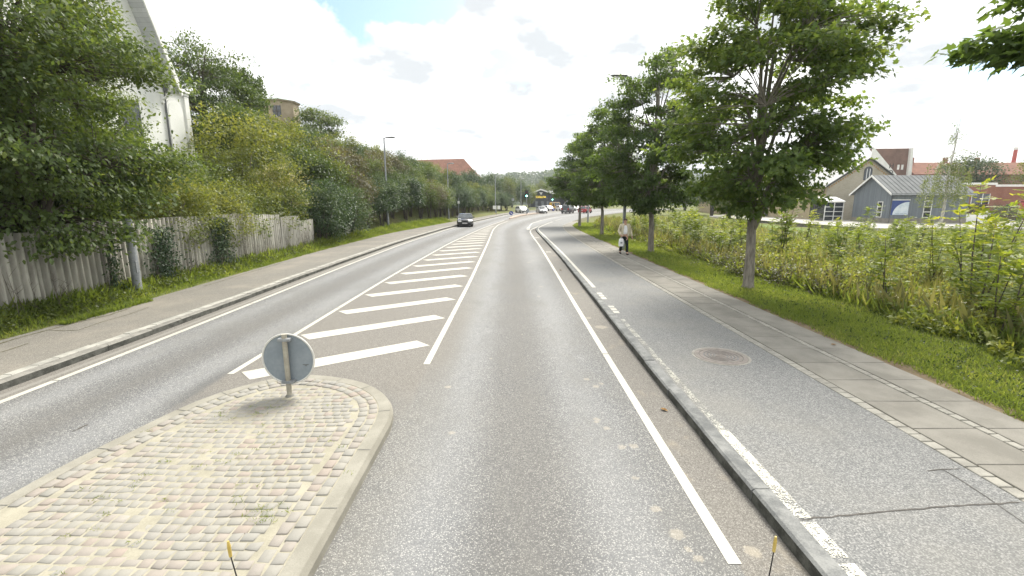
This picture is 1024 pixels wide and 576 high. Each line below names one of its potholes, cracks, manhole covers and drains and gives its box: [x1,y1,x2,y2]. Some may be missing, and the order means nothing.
manhole cover [691,347,752,366]
crack [799,468,1024,523]
